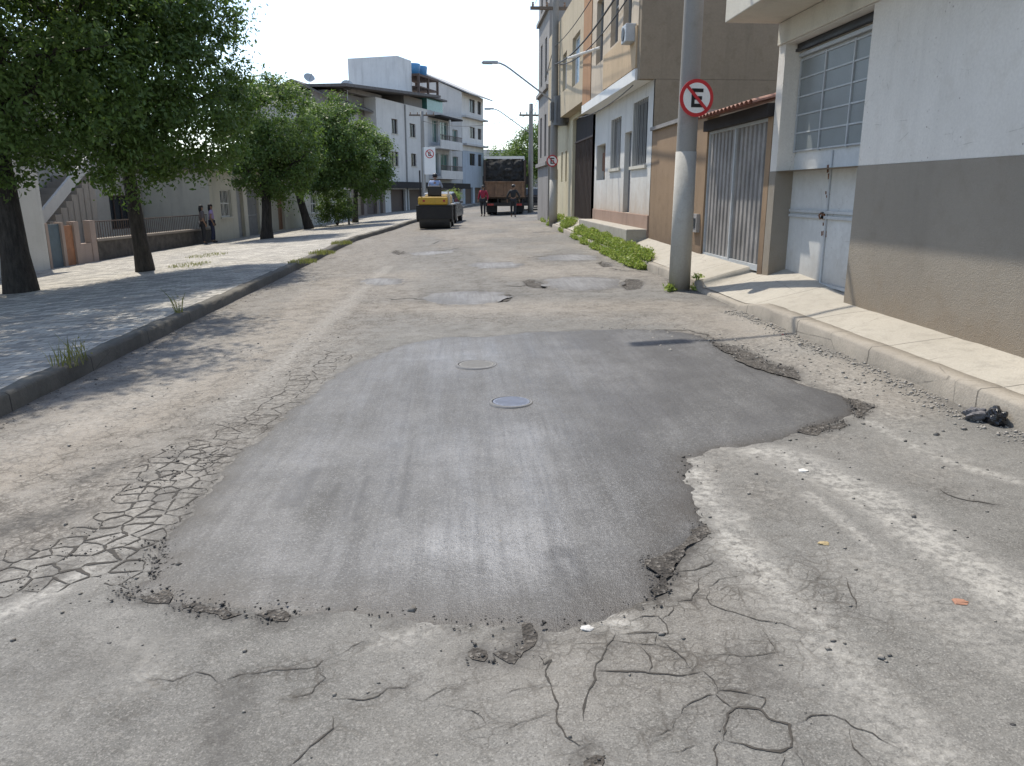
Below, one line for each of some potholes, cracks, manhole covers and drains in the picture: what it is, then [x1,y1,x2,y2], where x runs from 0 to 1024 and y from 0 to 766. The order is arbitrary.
pothole [523,280,548,289]
crack [183,344,350,474]
pothole [713,342,800,380]
crack [339,562,898,766]
crack [0,439,228,598]
pothole [623,279,643,290]
crack [154,639,372,700]
manhole cover [489,396,533,409]
manhole cover [455,360,497,370]
crack [290,719,334,765]
